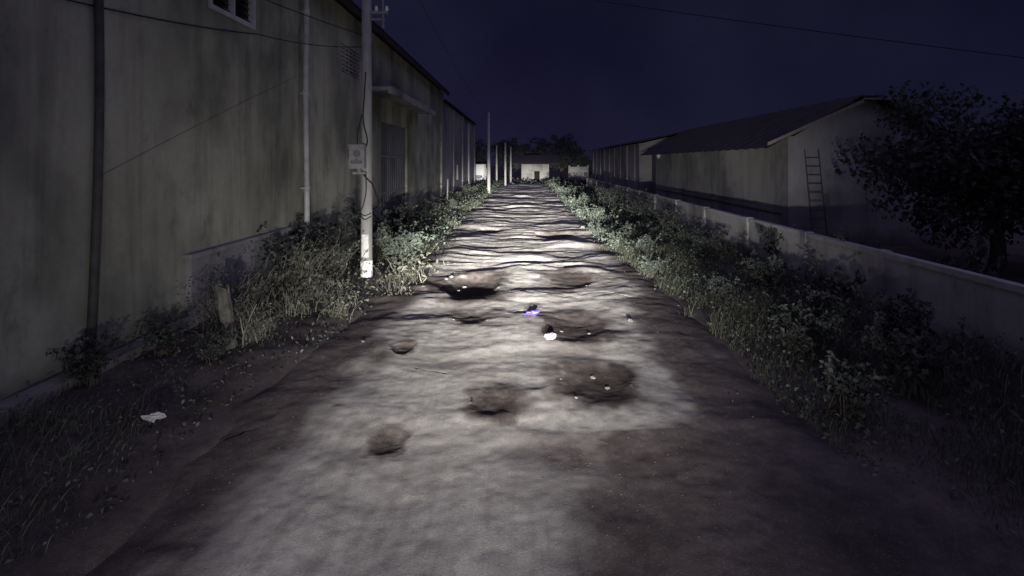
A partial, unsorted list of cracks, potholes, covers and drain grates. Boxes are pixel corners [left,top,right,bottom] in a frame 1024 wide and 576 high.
pothole [539,267,606,293]
pothole [384,339,418,357]
pothole [532,309,618,349]
pothole [353,423,415,461]
pothole [419,270,512,310]
pothole [543,358,659,415]
pothole [444,307,508,328]
pothole [456,379,535,426]
